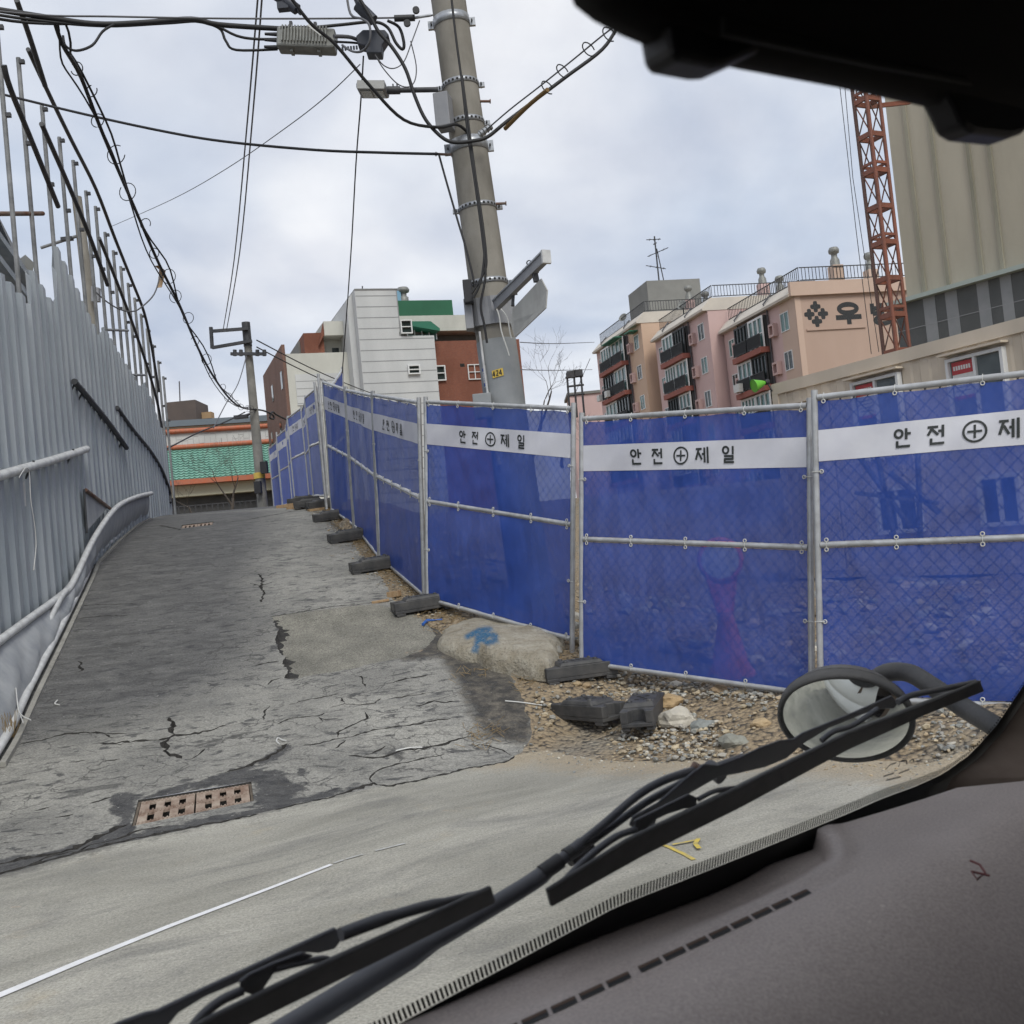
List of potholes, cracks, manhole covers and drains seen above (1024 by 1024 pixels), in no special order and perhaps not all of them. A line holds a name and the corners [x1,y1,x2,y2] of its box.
drain grate [132,782,254,826]
crack [250,574,392,617]
crack [21,717,226,762]
crack [263,674,515,810]
